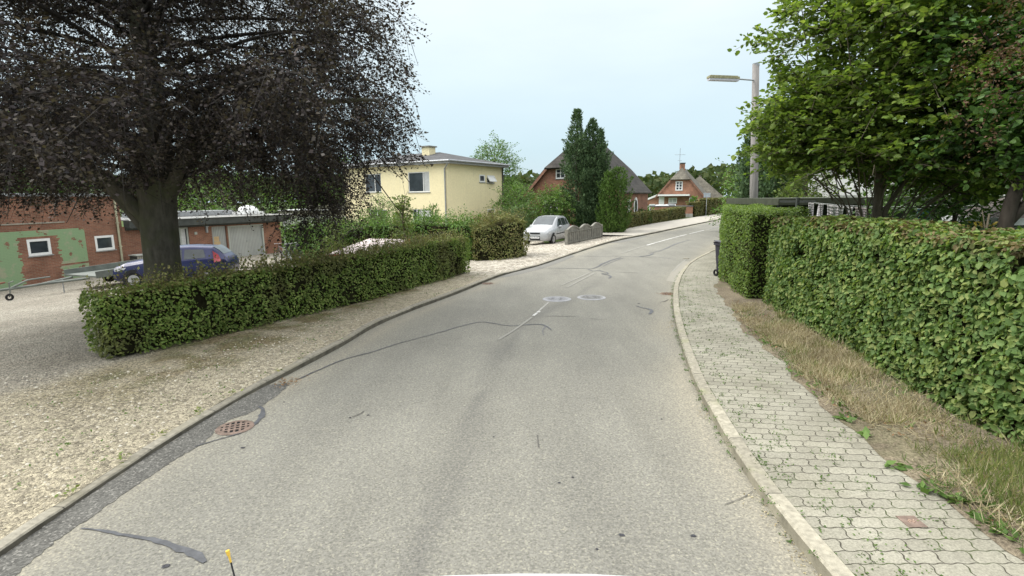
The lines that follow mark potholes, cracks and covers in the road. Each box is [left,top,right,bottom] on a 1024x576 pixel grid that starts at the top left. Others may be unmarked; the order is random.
drain grate [215,420,254,435]
utility cover [896,516,928,528]
